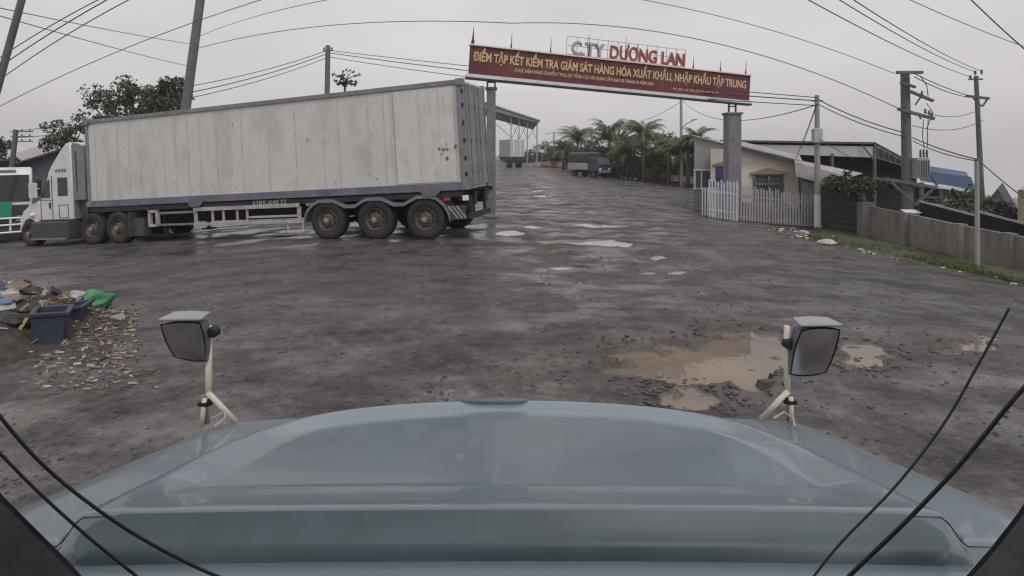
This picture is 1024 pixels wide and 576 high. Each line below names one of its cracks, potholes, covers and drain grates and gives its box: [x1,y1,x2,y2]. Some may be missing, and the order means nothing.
pothole [581,325,840,393]
pothole [657,385,726,411]
pothole [832,341,896,370]
pothole [521,236,637,248]
pothole [554,219,632,228]
pothole [917,332,1003,355]
